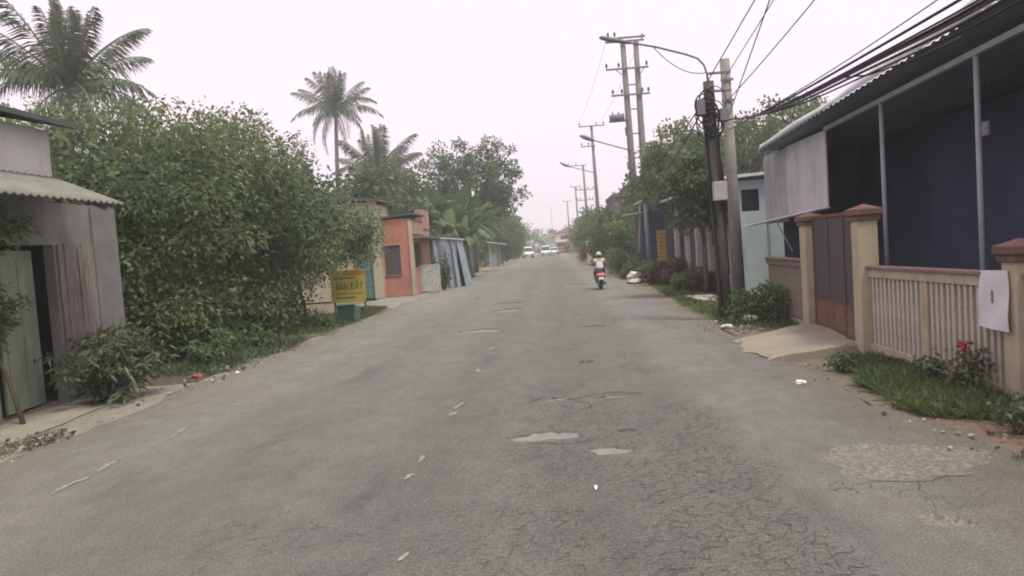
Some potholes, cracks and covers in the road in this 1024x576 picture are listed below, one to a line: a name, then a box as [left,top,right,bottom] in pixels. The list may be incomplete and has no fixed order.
crack [416,397,904,576]
crack [829,475,997,509]
